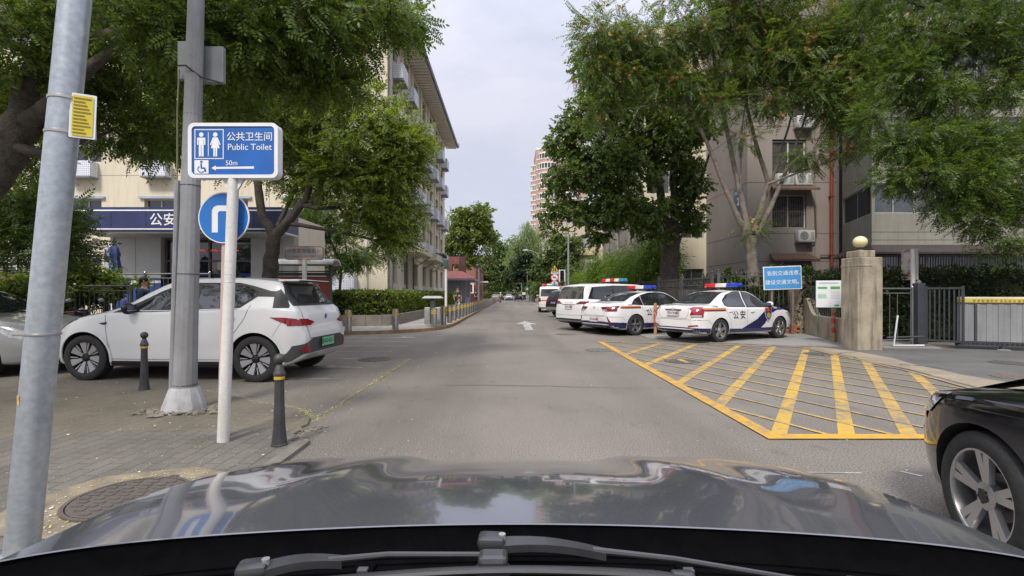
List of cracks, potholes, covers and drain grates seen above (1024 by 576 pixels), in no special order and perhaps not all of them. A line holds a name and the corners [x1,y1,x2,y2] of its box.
manhole cover [57,474,190,522]
